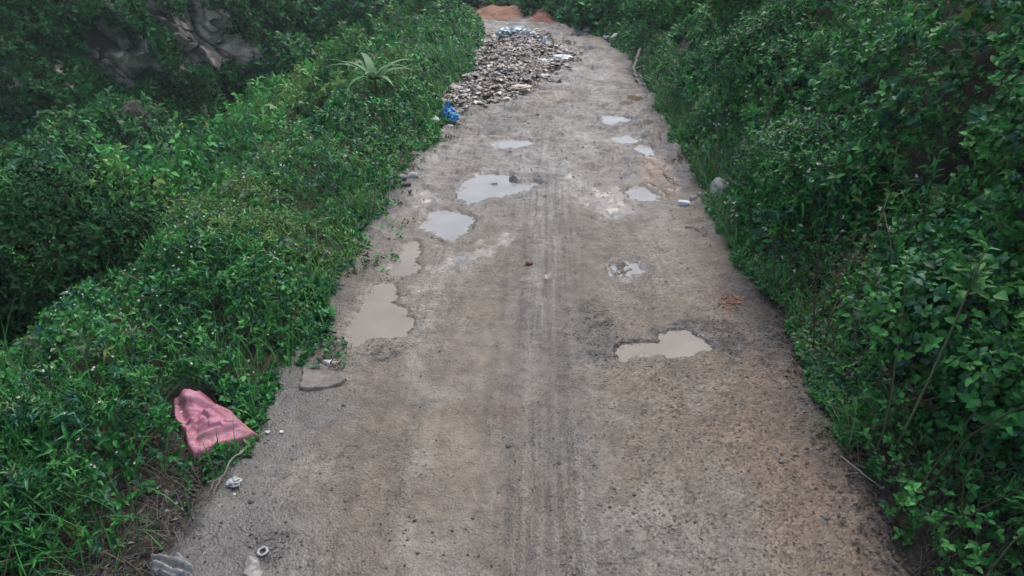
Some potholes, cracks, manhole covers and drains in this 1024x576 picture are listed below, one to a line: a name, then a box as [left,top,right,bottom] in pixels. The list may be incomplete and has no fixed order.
pothole [593,112,642,126]
pothole [619,182,670,204]
pothole [332,275,421,351]
pothole [412,205,485,243]
pothole [481,135,544,149]
pothole [601,130,652,146]
pothole [447,168,549,207]
pothole [596,254,650,284]
pothole [602,324,724,364]
pothole [375,237,428,278]
pothole [627,140,664,157]
